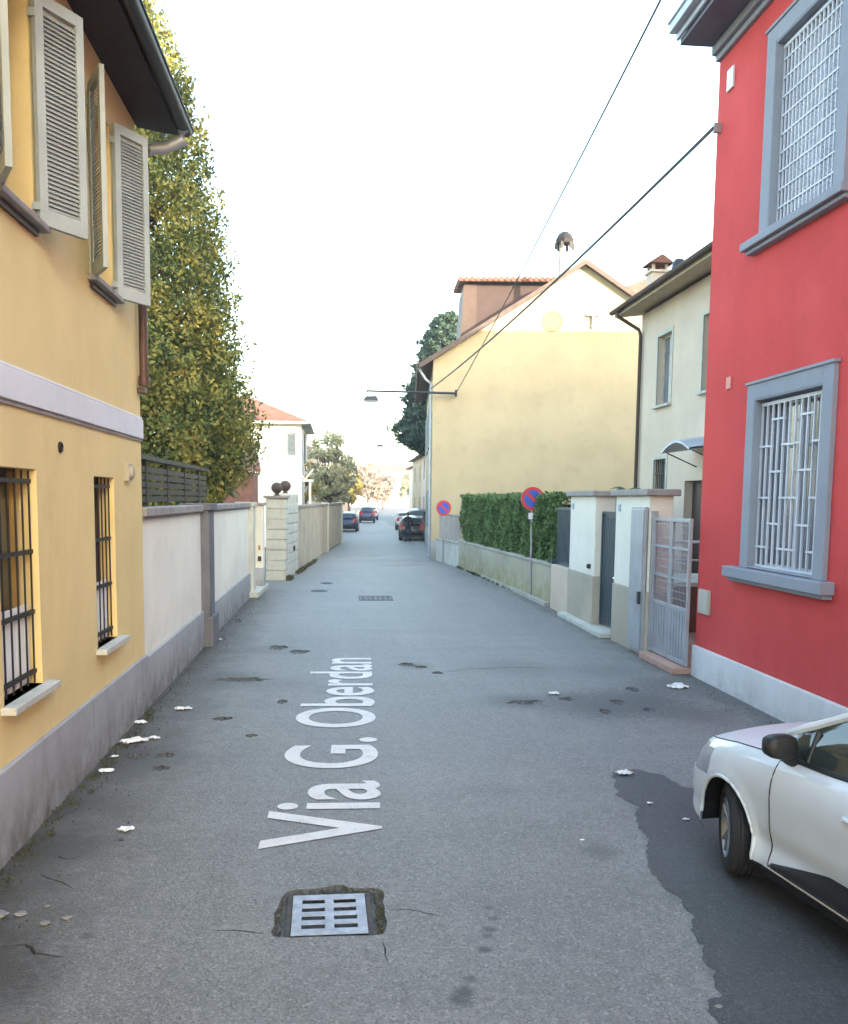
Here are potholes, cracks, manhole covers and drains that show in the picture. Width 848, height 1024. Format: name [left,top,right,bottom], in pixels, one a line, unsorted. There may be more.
drain grate [284,892,375,938]
crack [0,943,62,957]
crack [41,855,80,889]
